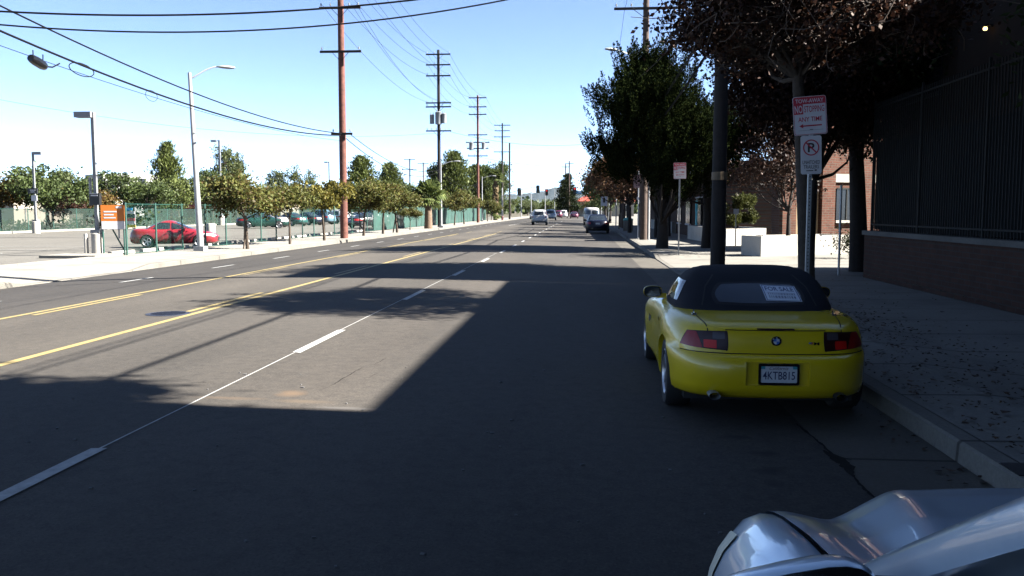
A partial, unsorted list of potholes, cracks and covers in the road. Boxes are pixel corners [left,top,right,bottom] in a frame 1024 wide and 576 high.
crack [796,423,875,498]
